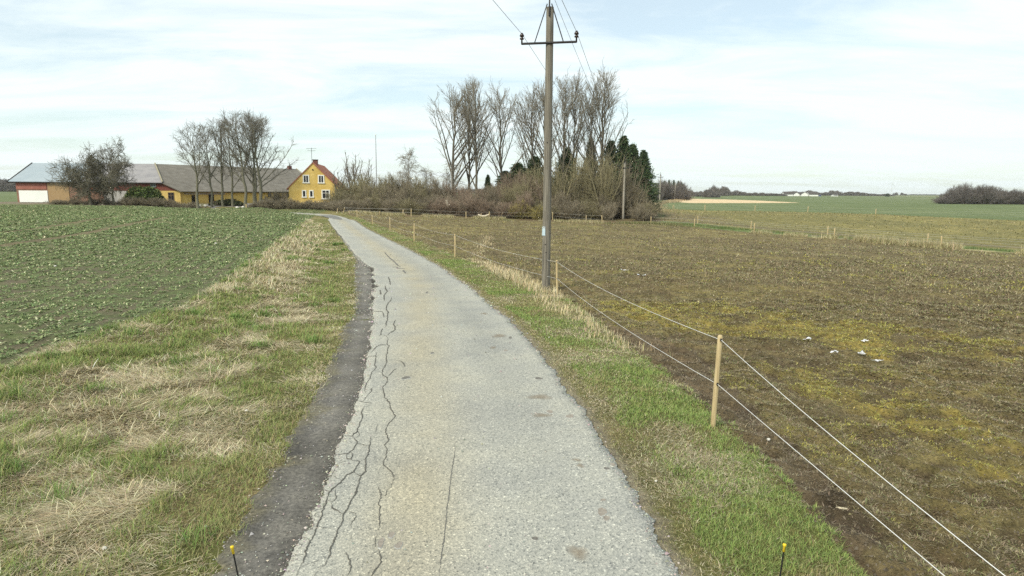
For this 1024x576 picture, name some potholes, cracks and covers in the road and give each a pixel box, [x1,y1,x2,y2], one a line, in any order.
crack [291,253,406,576]
